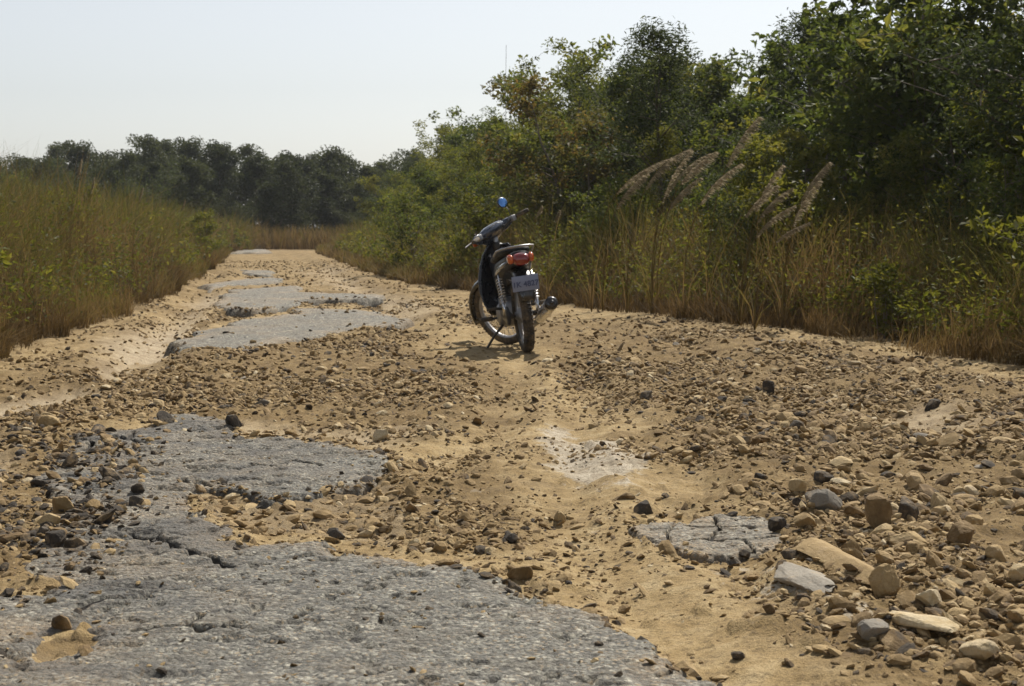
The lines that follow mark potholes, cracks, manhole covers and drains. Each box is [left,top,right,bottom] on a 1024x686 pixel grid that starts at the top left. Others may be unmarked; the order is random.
pothole [33,632,96,662]
crack [133,536,230,568]
crack [666,520,756,554]
pothole [198,476,407,547]
